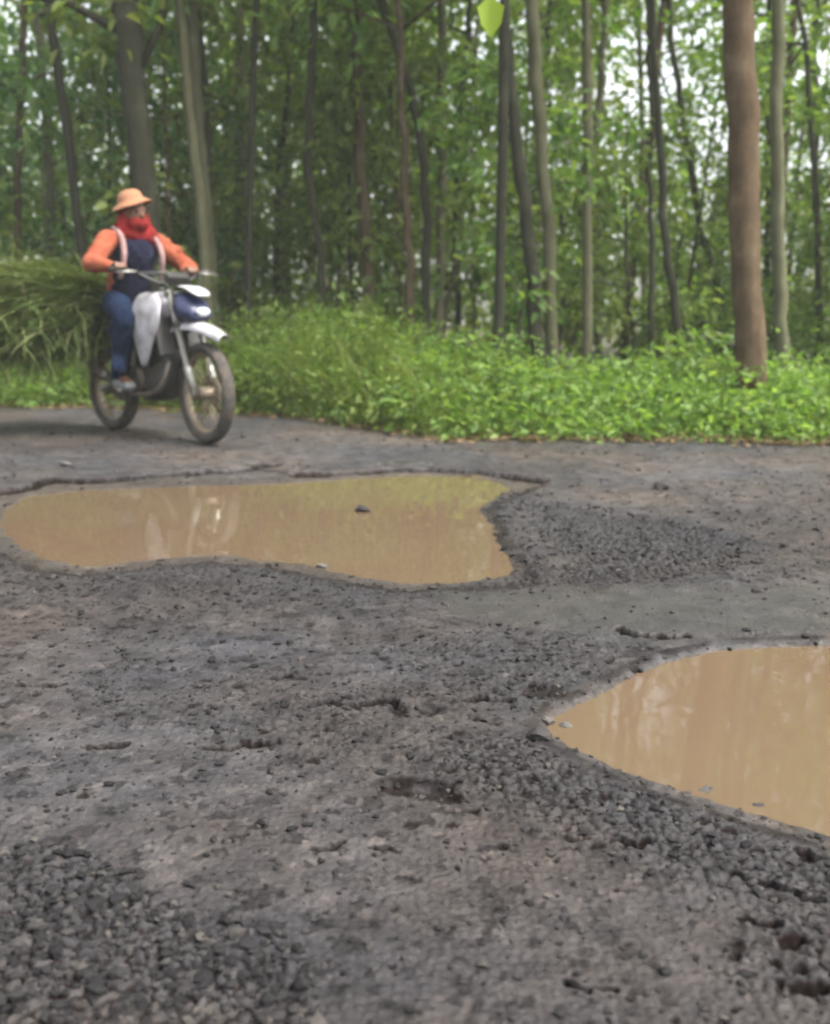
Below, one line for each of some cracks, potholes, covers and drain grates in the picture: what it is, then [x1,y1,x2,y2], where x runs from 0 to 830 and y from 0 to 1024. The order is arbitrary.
pothole [0,468,552,593]
pothole [527,635,830,853]
pothole [507,498,776,589]
